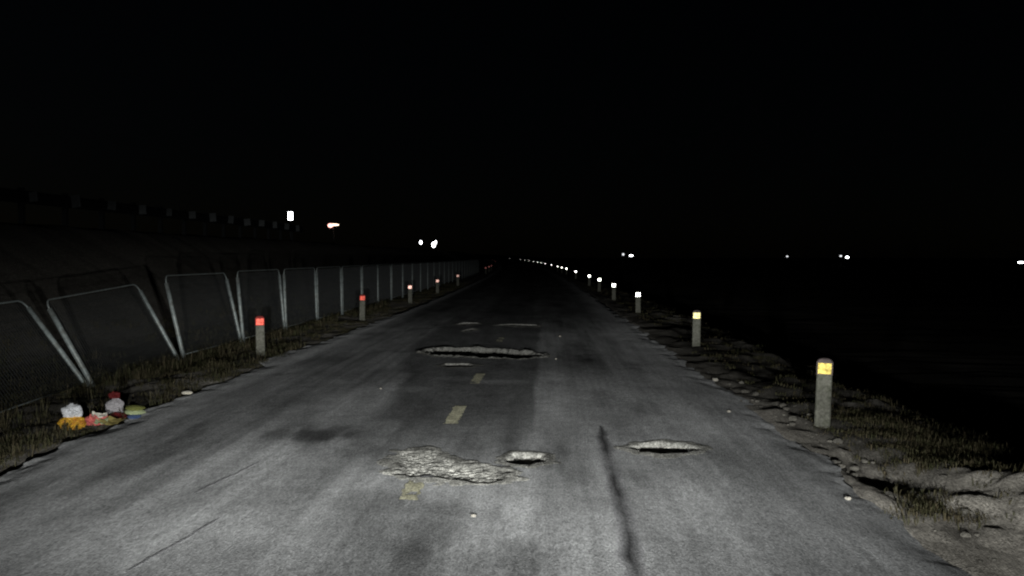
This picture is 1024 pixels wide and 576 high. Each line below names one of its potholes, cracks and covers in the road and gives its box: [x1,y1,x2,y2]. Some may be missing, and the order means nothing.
pothole [376,445,529,486]
pothole [494,451,561,468]
pothole [415,346,551,360]
crack [195,461,260,493]
crack [127,518,219,571]
crack [594,426,649,576]
pothole [613,439,713,458]
